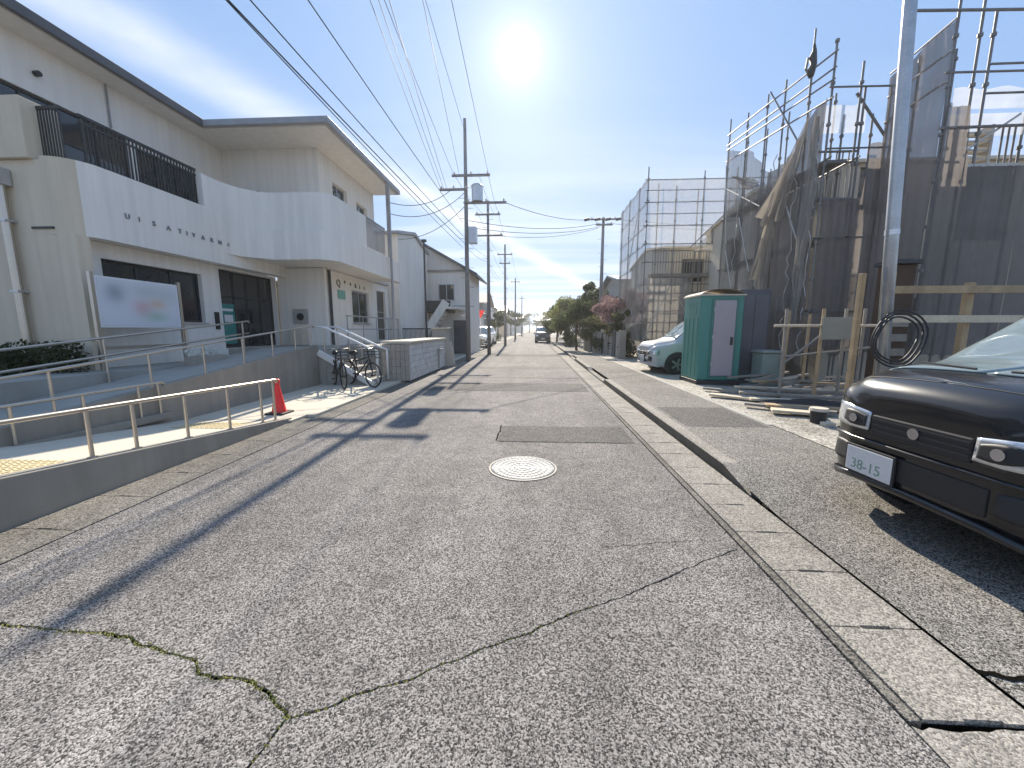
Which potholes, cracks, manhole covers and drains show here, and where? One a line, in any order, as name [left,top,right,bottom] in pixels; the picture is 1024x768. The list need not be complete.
crack [975,669,1024,681]
crack [0,565,698,768]
manhole cover [489,456,557,481]
